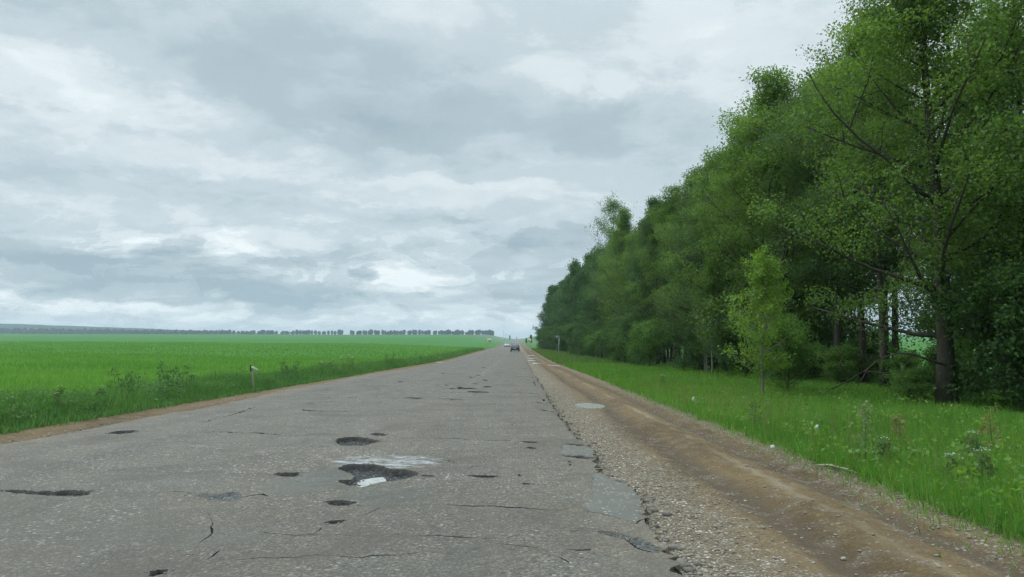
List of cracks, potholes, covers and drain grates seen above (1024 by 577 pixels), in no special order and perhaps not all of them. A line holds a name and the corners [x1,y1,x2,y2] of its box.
crack [183,513,591,564]
pothole [338,464,419,486]
crack [428,503,566,511]
pothole [335,437,379,446]
